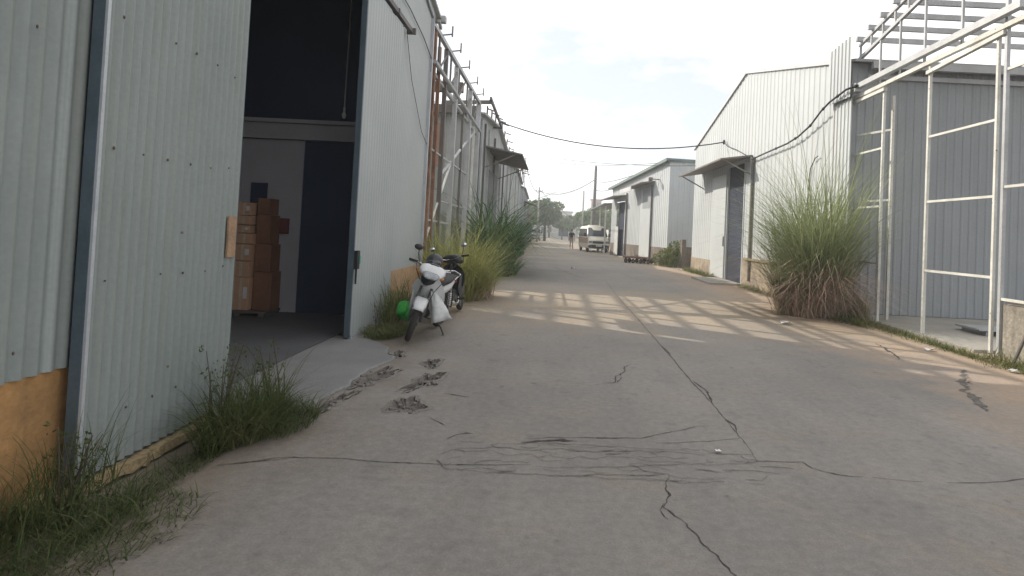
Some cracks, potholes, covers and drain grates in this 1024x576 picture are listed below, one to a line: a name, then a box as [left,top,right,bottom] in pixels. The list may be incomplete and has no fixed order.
pothole [418,358,443,370]
pothole [380,394,434,414]
pothole [344,365,402,391]
pothole [395,371,450,394]
crack [223,419,919,576]
crack [957,370,988,411]
